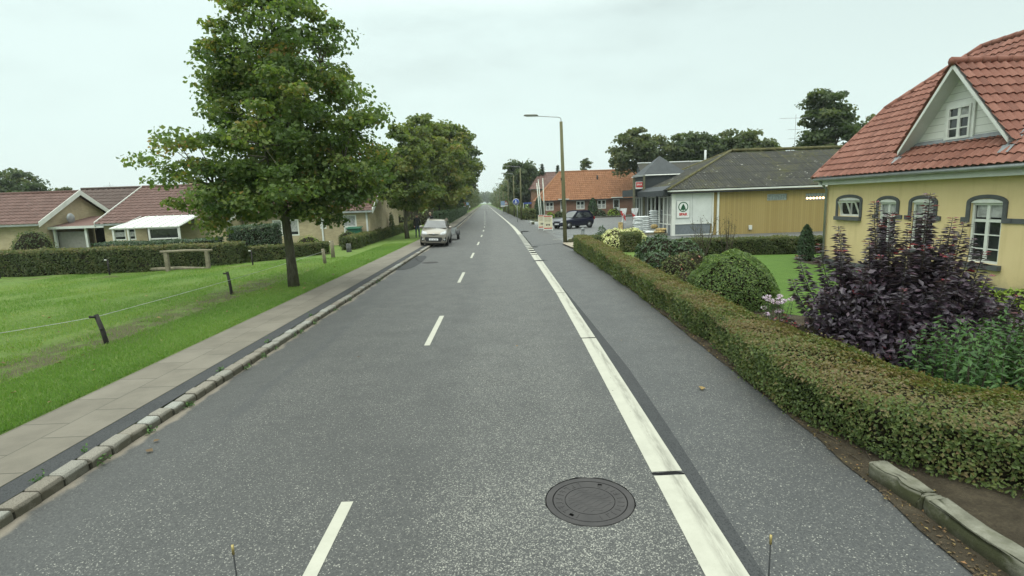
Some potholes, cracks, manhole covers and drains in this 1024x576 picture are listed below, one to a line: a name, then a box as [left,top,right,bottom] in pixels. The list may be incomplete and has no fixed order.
manhole cover [545,477,636,527]
